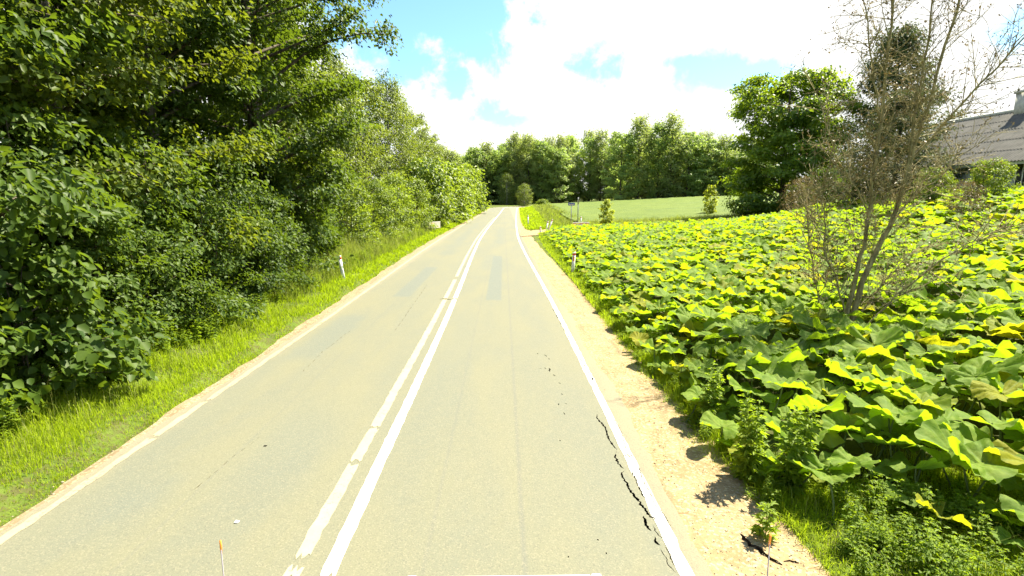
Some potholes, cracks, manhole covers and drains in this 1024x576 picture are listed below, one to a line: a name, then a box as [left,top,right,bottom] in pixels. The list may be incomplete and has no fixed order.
crack [596,408,675,572]
